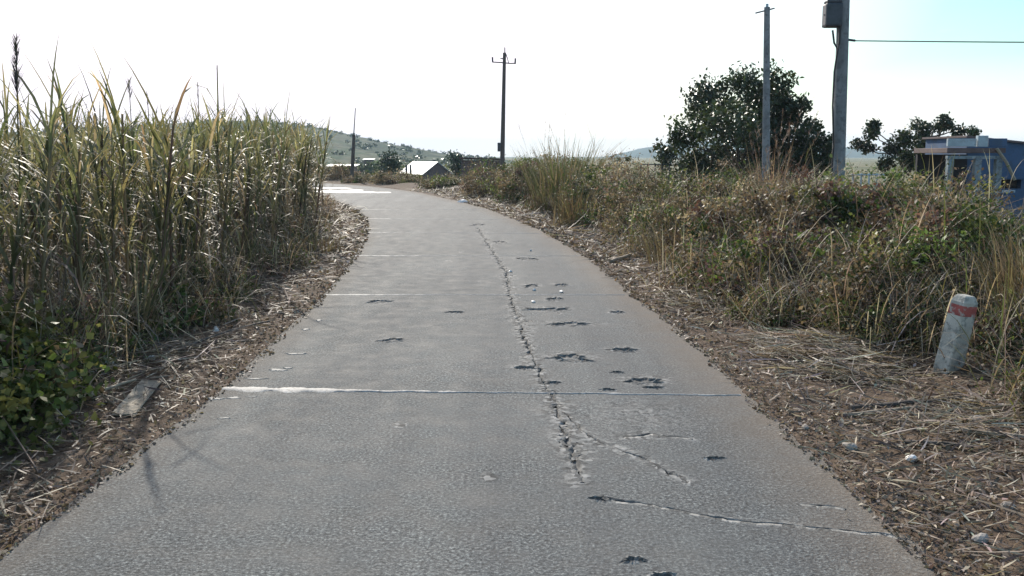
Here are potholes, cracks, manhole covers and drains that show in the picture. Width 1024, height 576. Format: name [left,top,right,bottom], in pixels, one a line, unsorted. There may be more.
pothole [619,555,649,565]
crack [476,228,910,543]
pothole [547,354,596,363]
pothole [622,378,665,386]
